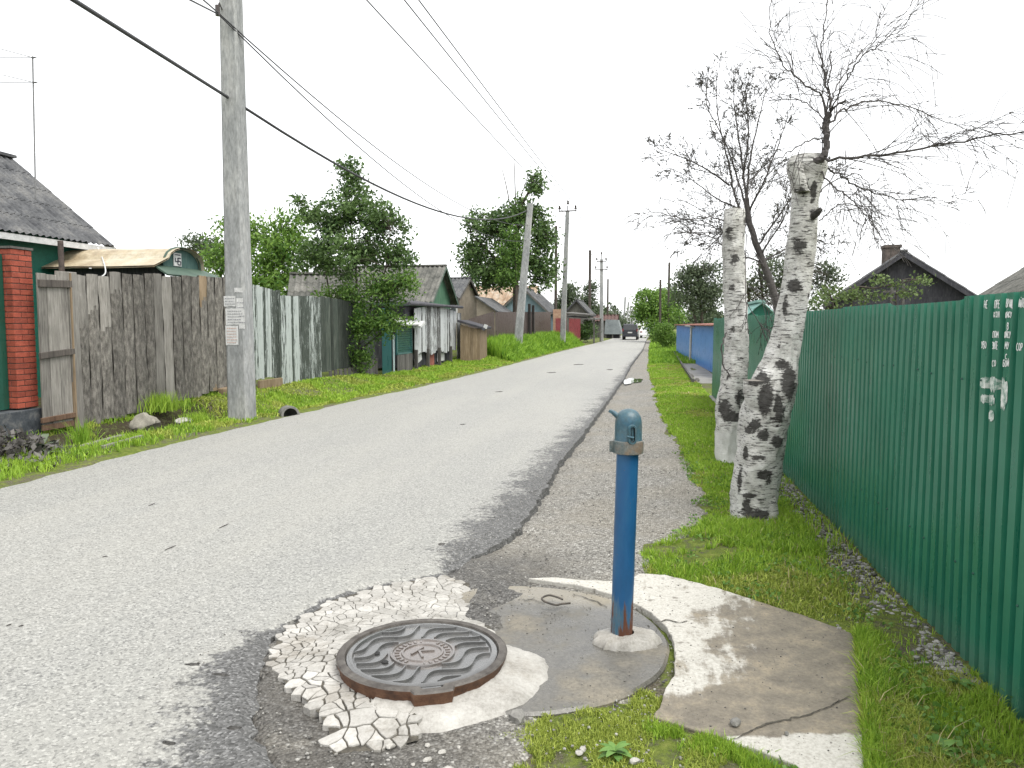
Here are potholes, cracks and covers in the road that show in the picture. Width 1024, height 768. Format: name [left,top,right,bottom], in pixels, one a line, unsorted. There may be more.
crack [734,695,850,739]
manhole cover [336,619,507,707]
